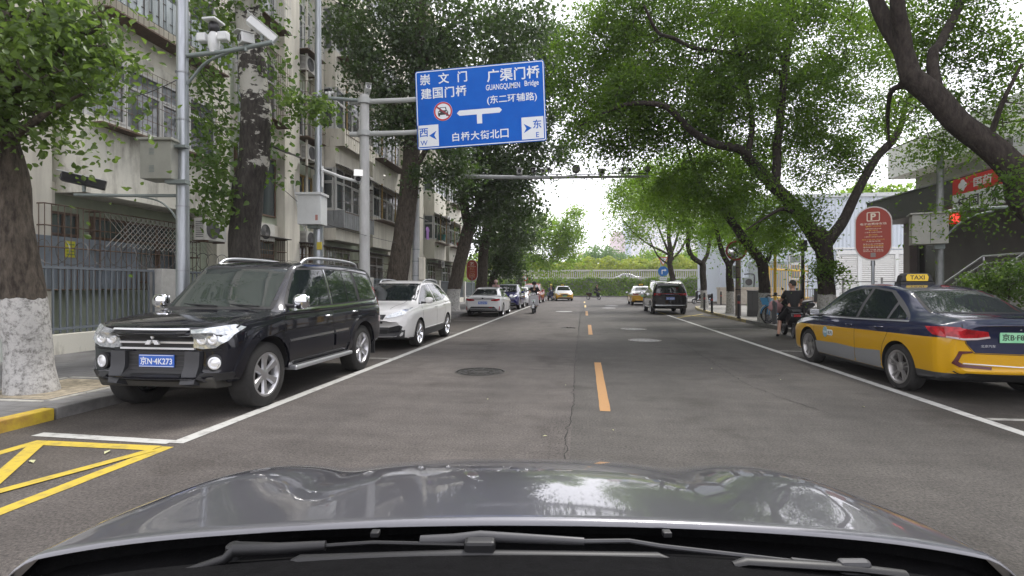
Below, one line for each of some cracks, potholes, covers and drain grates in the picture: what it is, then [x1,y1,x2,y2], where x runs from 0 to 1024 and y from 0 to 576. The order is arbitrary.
crack [492,310,601,459]
manhole cover [455,367,506,376]
